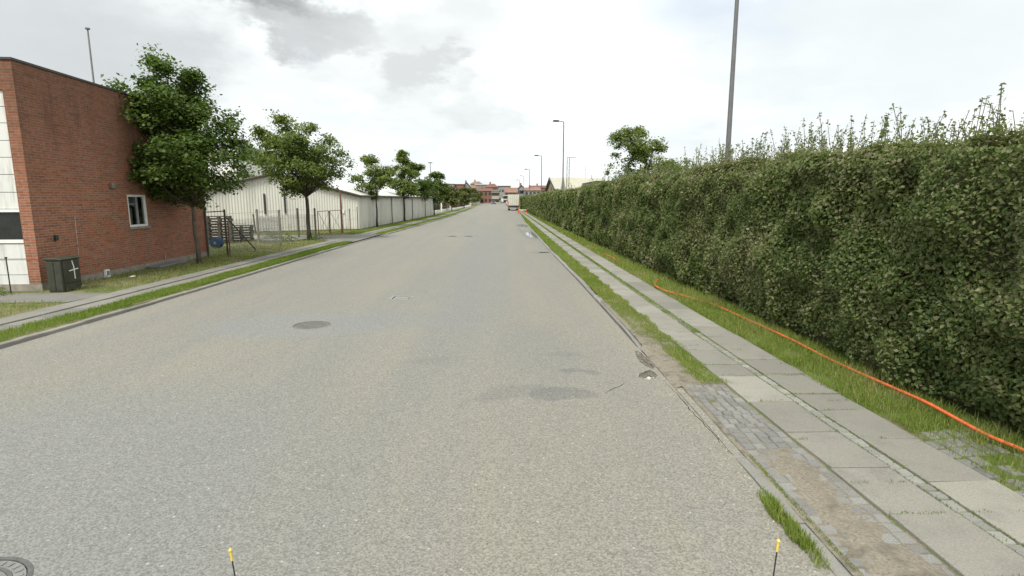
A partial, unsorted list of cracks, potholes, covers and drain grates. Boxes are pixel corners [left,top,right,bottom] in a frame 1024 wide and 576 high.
manhole cover [292,321,331,329]
manhole cover [0,557,34,576]
pothole [639,370,657,380]
crack [666,383,728,452]
pothole [635,351,655,369]
